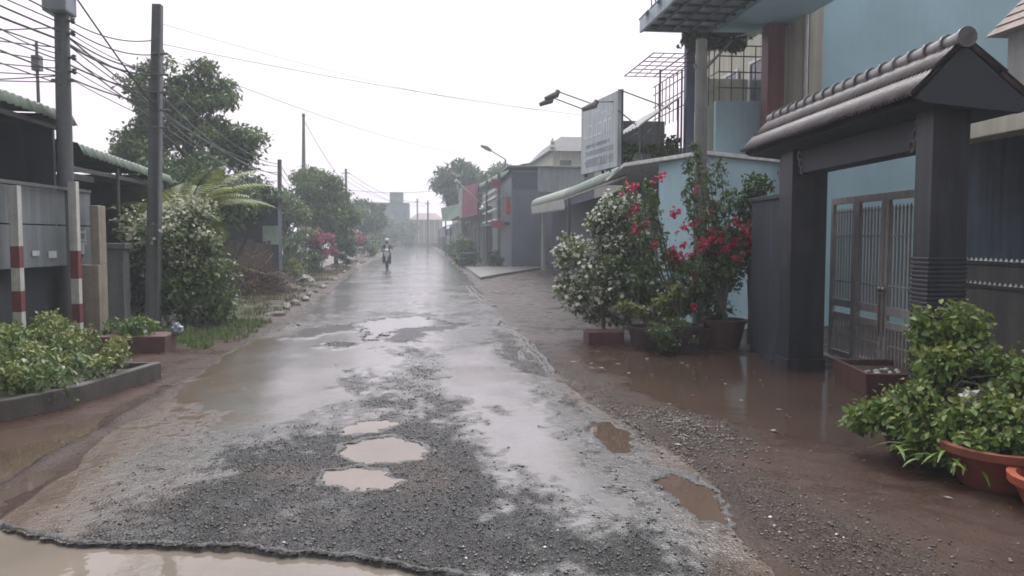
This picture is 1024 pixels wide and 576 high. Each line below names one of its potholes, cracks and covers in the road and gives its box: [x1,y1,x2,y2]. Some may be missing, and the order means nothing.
pothole [332,434,437,466]
pothole [0,519,476,576]
pothole [327,418,403,438]
pothole [322,315,462,341]
pothole [577,420,640,457]
pothole [313,465,408,493]
pothole [643,471,736,527]
